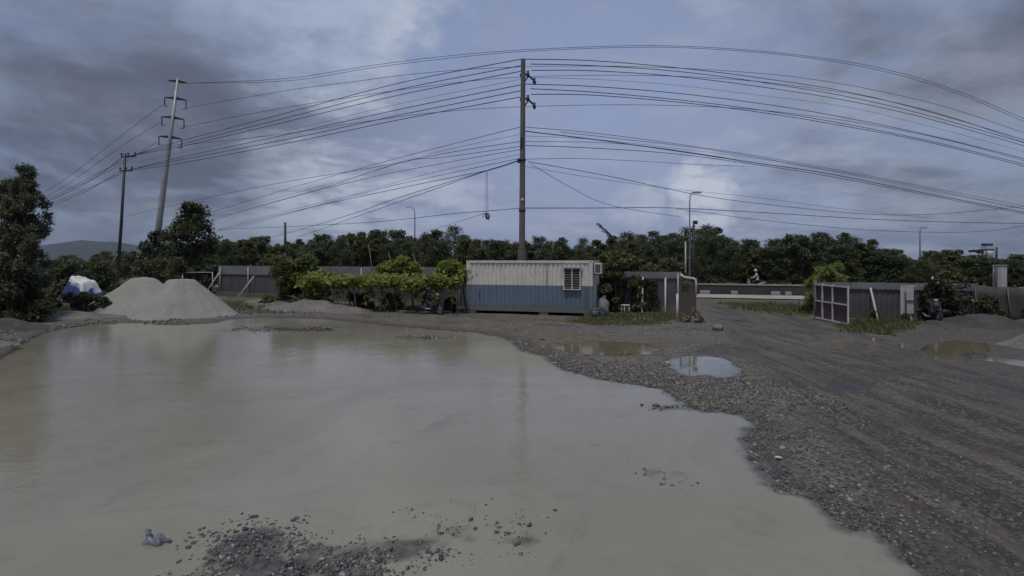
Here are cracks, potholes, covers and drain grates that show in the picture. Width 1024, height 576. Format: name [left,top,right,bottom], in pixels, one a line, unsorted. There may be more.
pothole [911,339,996,360]
pothole [550,340,670,356]
pothole [663,354,749,378]
